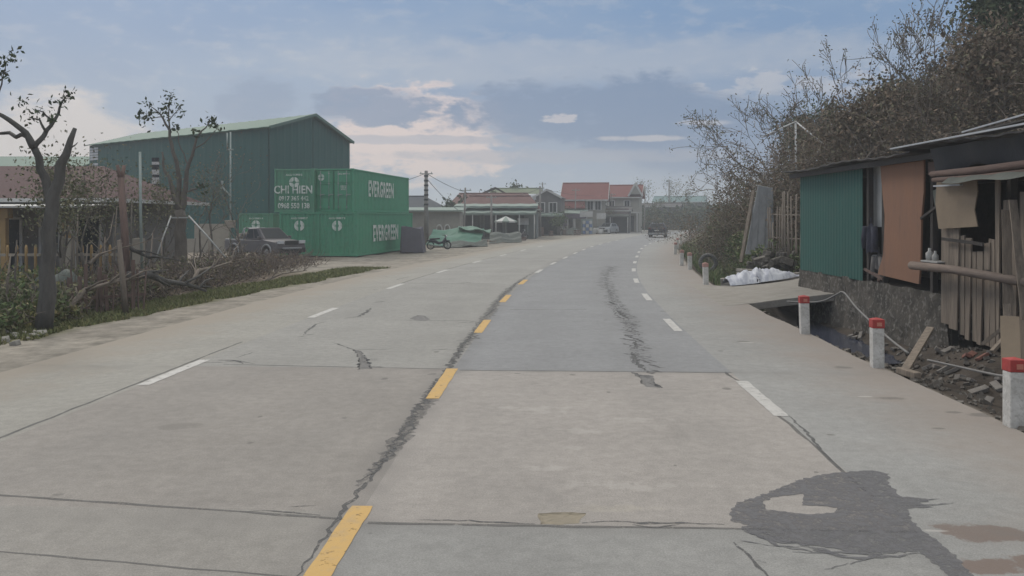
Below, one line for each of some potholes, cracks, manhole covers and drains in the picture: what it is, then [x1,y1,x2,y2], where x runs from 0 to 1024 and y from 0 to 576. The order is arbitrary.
crack [733,542,769,576]
crack [244,272,535,576]
crack [725,372,842,470]
crack [596,266,663,374]
